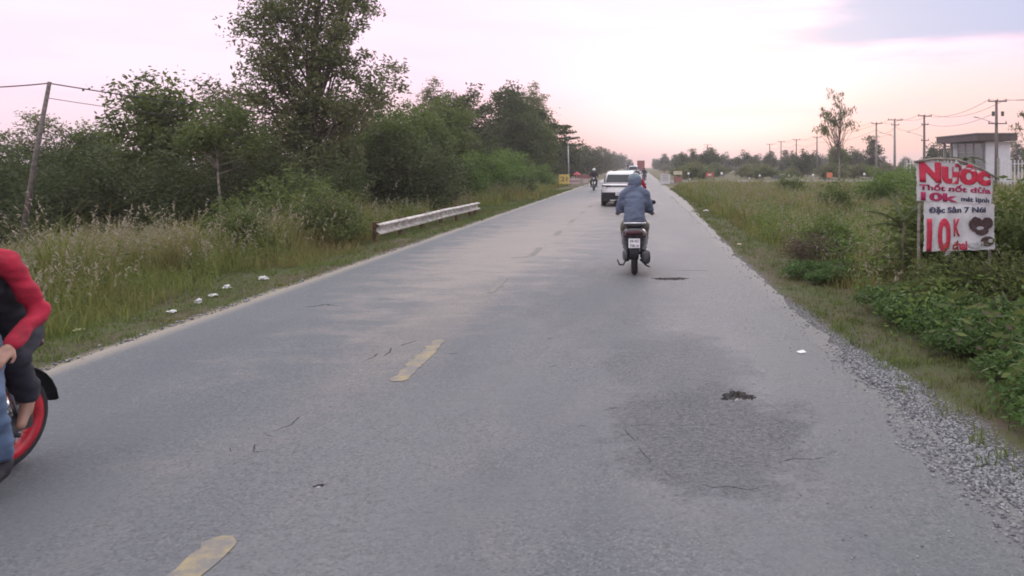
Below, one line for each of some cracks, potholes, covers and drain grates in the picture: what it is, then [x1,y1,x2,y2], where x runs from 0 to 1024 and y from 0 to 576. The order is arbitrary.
crack [230,416,300,461]
crack [626,398,823,490]
pothole [720,391,757,401]
